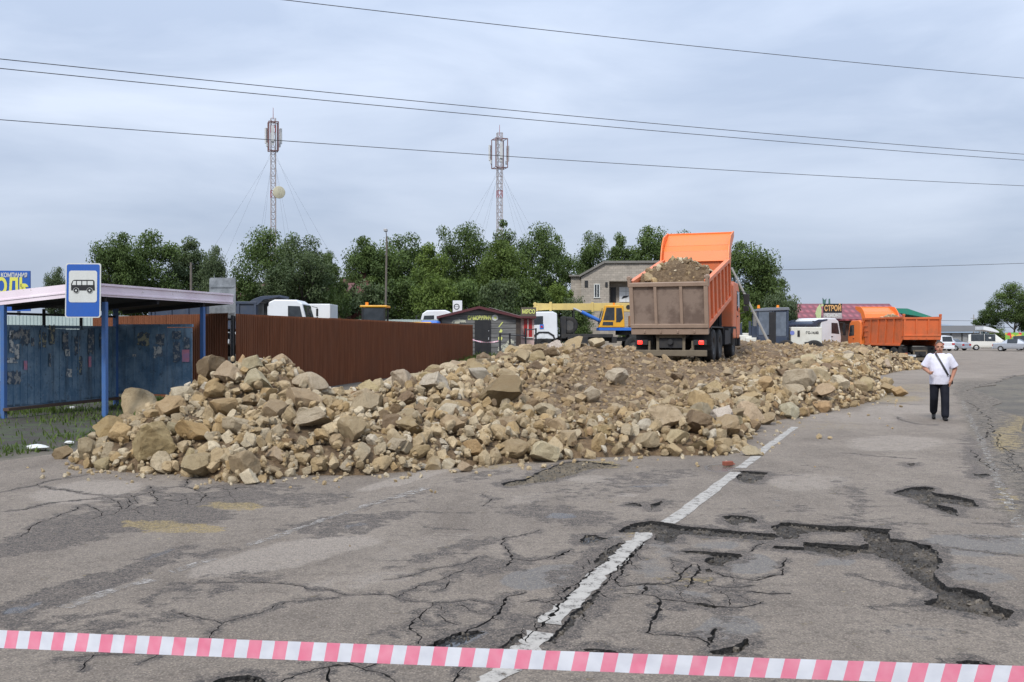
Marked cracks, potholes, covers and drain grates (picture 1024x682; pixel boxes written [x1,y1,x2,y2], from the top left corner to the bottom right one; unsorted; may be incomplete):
pothole [501,461,617,486]
crack [9,474,247,537]
pothole [427,630,485,647]
crack [962,376,1024,472]
pothole [771,522,1014,622]
pothole [682,551,742,567]
pothole [723,515,757,526]
crack [171,530,791,648]
crack [281,663,465,682]
pothole [736,471,768,484]
crack [58,653,158,671]
pothole [618,521,779,543]
